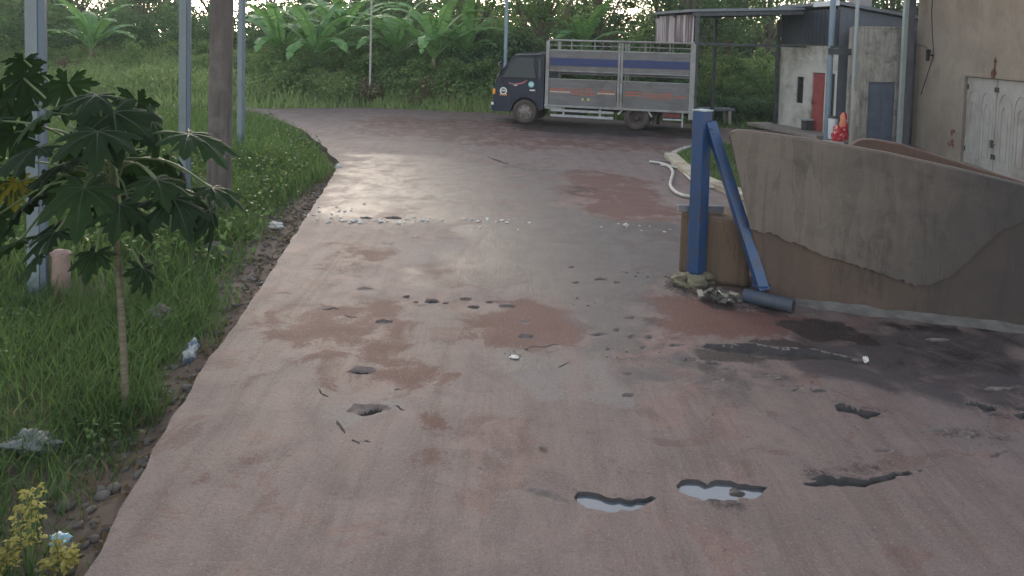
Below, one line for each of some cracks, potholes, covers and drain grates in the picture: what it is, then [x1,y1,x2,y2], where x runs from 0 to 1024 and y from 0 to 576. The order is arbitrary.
pothole [797,469,928,487]
pothole [835,403,881,420]
pothole [346,366,376,374]
pothole [676,479,767,501]
pothole [574,492,661,512]
pothole [345,403,392,416]
pothole [964,401,1000,412]
